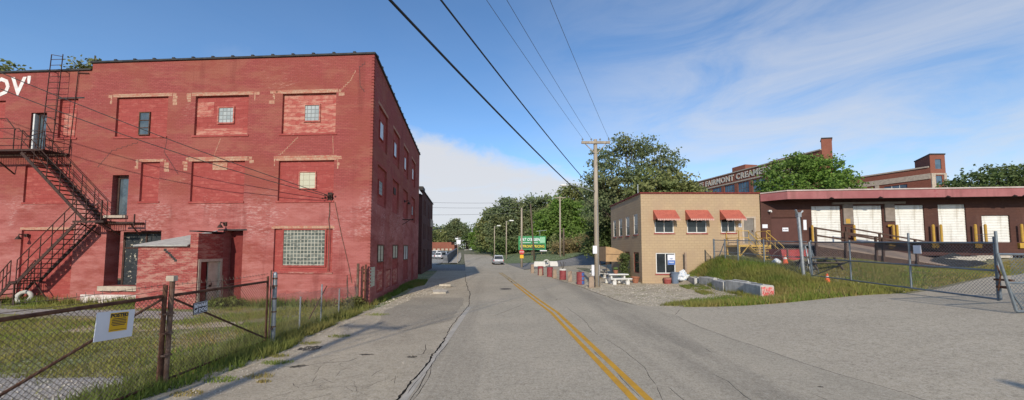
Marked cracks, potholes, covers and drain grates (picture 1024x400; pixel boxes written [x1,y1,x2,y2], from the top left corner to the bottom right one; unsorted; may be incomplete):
crack [267,300,470,400]
